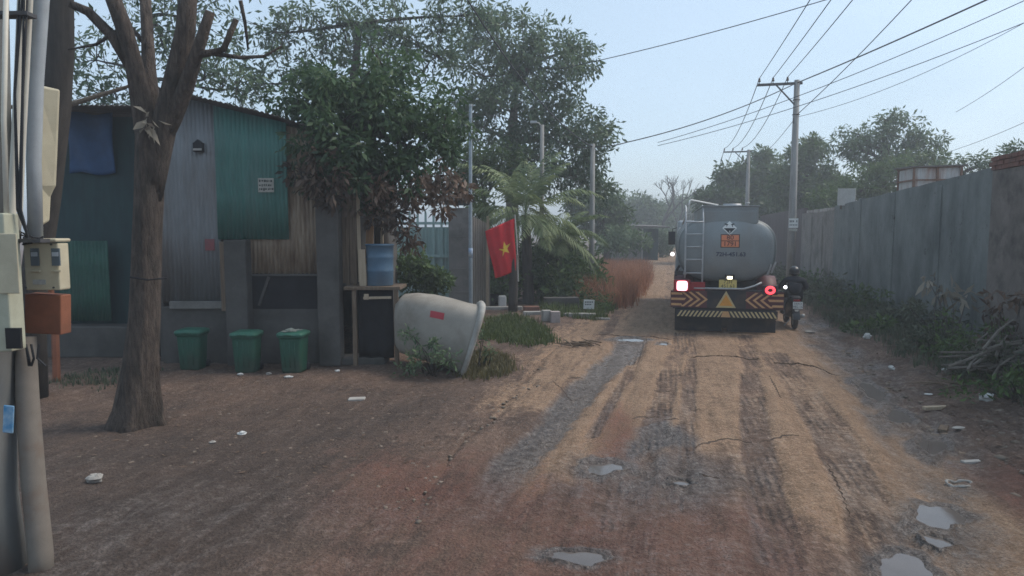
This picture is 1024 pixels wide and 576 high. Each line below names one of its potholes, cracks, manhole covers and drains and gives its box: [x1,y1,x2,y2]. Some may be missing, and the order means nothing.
pothole [577,457,632,477]
pothole [870,546,945,576]
pothole [907,499,979,532]
pothole [541,547,617,570]
crack [698,435,798,446]
pothole [916,529,961,552]
crack [827,463,850,514]
